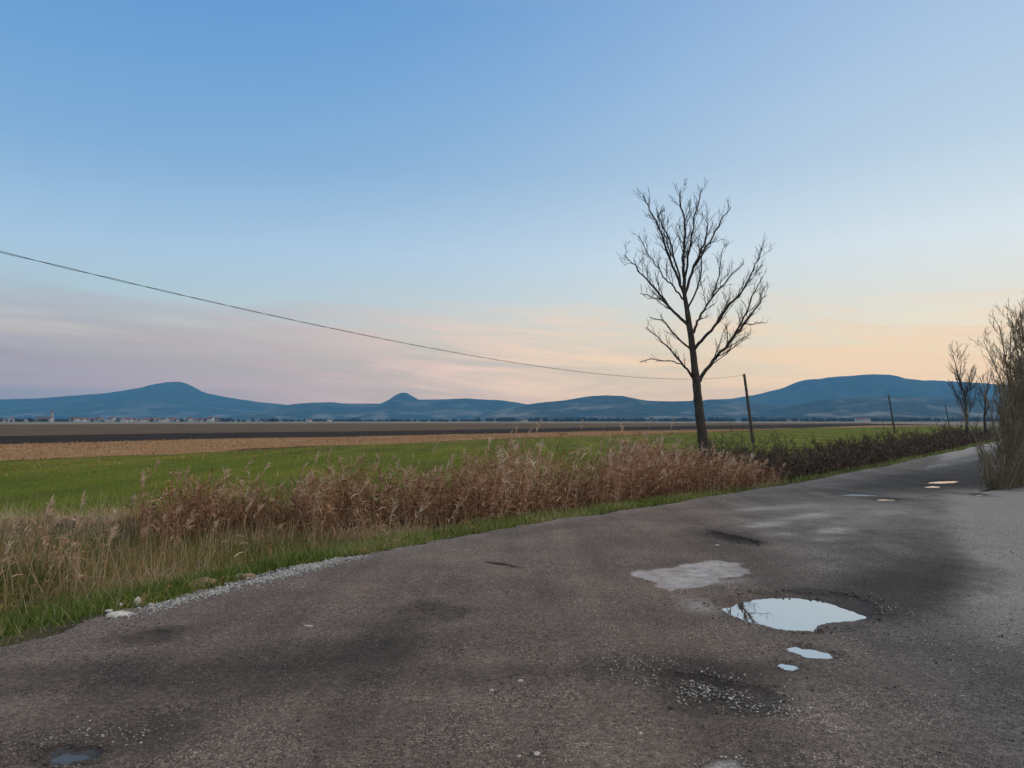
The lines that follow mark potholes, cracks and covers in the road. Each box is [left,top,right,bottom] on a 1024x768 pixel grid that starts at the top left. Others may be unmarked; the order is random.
pothole [771,659,806,671]
pothole [656,672,782,716]
pothole [709,591,879,632]
pothole [708,530,761,545]
